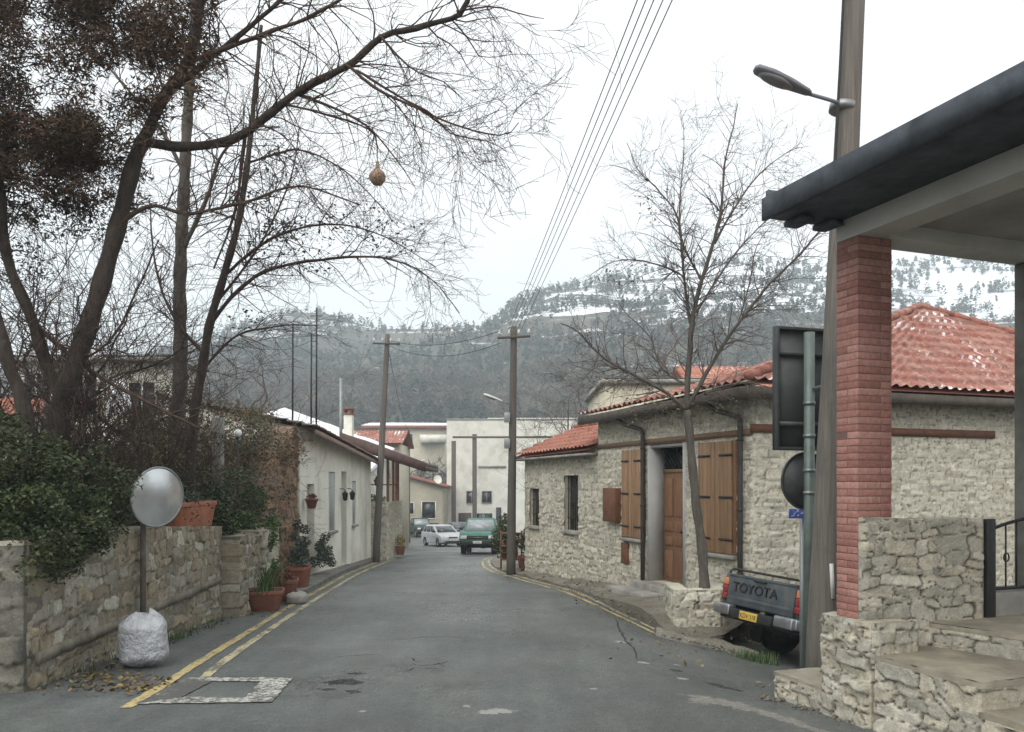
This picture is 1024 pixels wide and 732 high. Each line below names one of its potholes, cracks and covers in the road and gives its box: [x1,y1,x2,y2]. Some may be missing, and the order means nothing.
crack [398,657,448,672]
